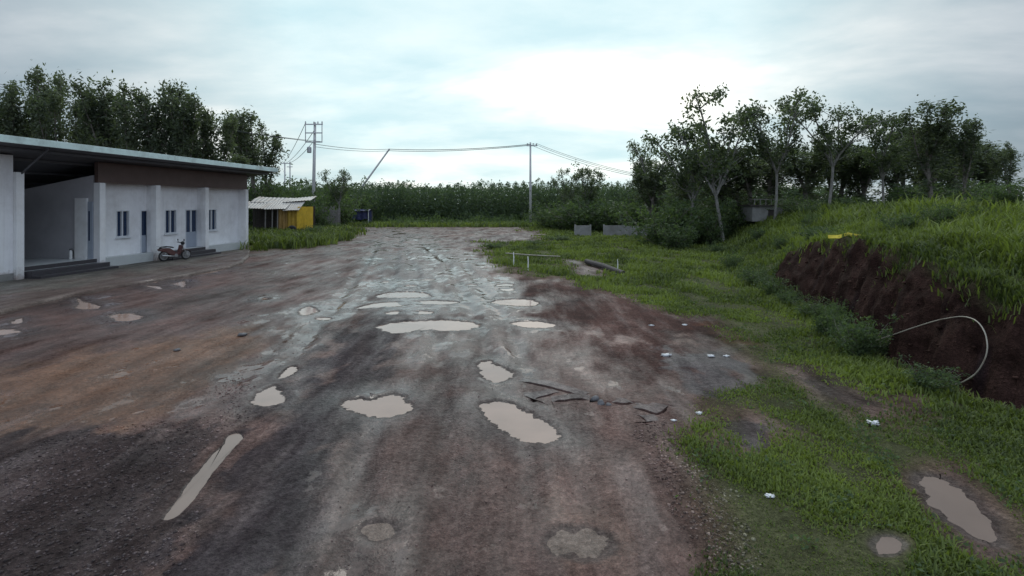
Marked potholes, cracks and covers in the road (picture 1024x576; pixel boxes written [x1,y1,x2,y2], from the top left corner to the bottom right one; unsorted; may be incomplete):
pothole [287,304,330,317]
pothole [466,358,527,387]
pothole [464,395,578,450]
pothole [363,317,489,336]
pothole [499,318,568,330]
pothole [143,427,257,529]
pothole [482,297,550,308]
pothole [236,382,300,412]
pothole [96,311,155,324]
pothole [887,463,1024,562]
crack [515,378,683,425]
pothole [327,388,427,423]
